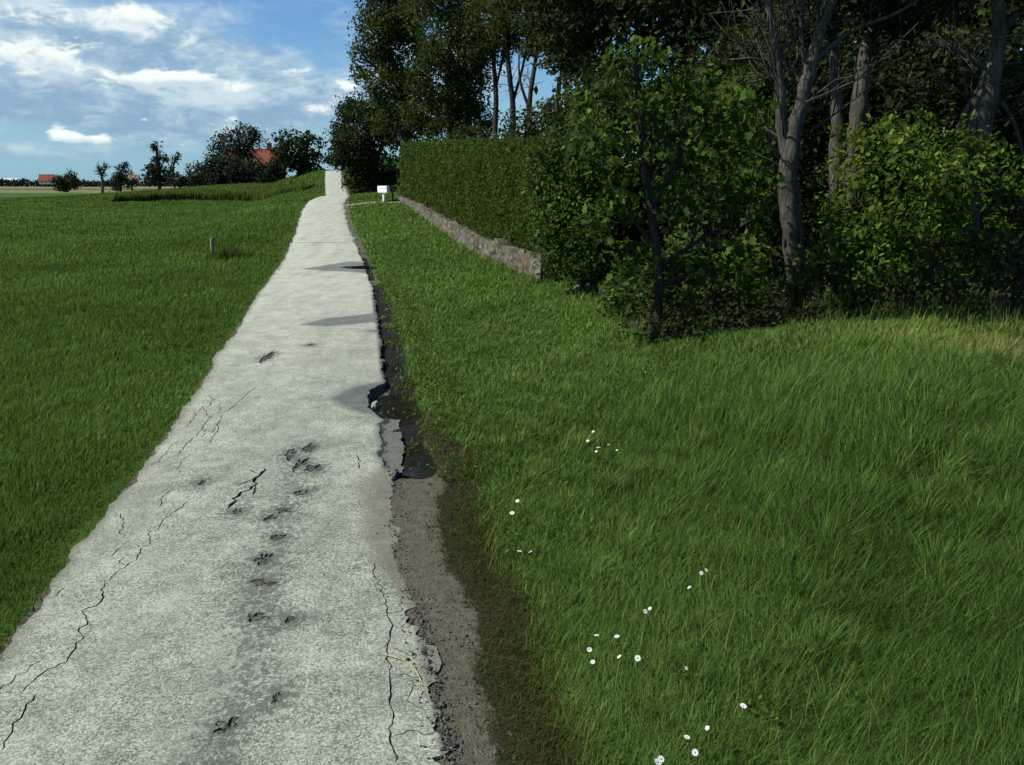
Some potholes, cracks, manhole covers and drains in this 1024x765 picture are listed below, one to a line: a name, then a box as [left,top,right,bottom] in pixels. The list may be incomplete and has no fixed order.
crack [372,564,438,764]
pothole [377,417,405,473]
crack [228,469,266,508]
pothole [367,384,389,423]
crack [0,390,252,750]
